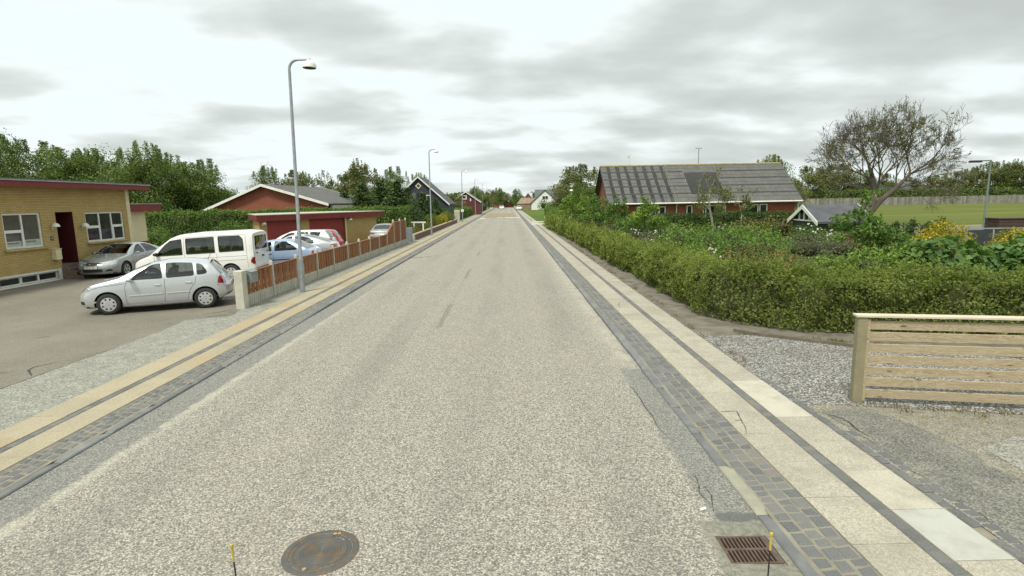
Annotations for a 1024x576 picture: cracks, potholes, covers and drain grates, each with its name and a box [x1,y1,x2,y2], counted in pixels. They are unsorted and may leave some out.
manhole cover [281,530,359,576]
drain grate [715,535,788,566]
